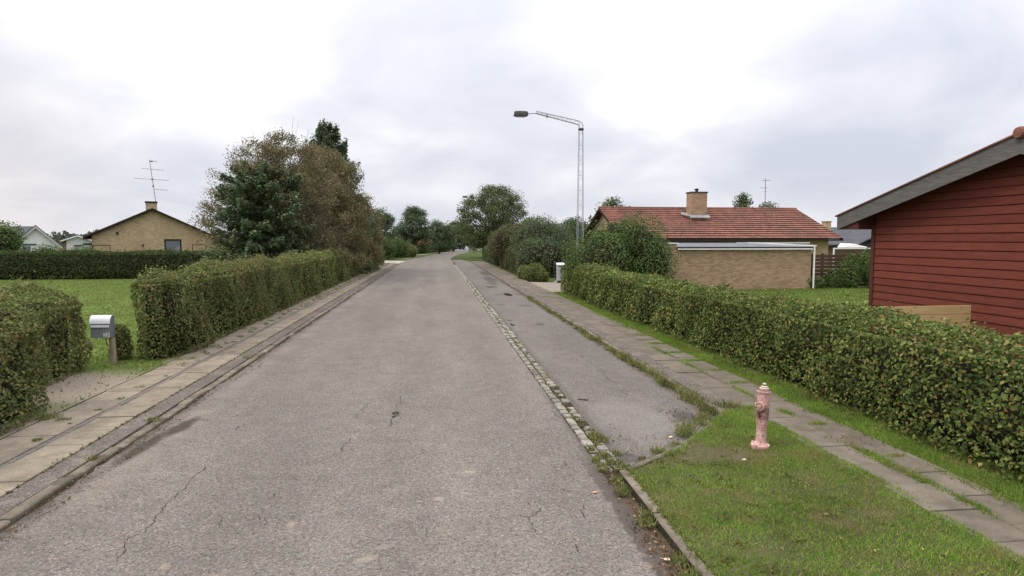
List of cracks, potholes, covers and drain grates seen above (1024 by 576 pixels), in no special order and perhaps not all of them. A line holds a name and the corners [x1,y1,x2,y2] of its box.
crack [119,467,206,557]
